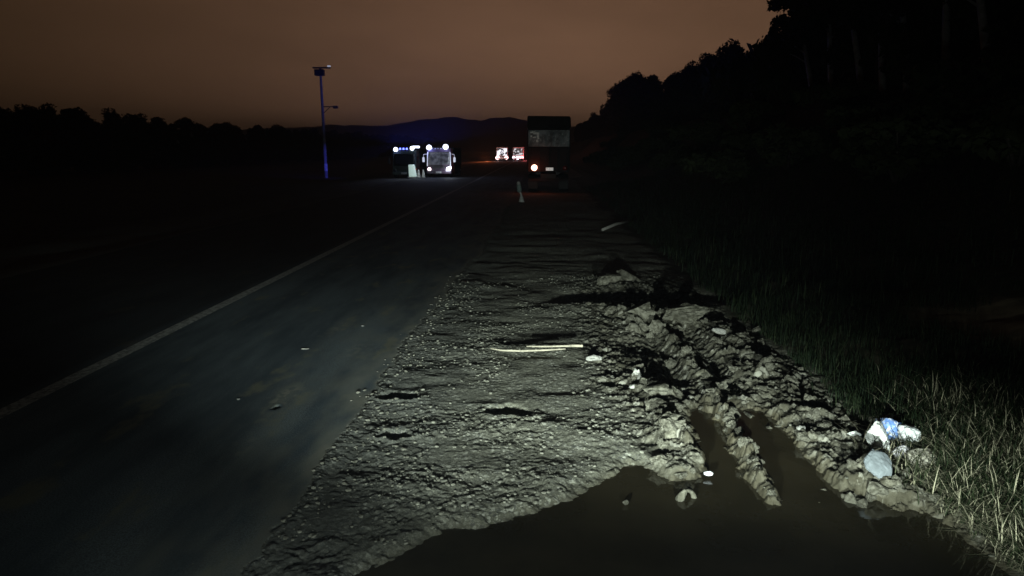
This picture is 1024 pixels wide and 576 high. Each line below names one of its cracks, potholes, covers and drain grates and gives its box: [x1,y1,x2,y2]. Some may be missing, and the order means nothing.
pothole [371,389,428,401]
pothole [354,404,1023,576]
pothole [477,401,539,417]
